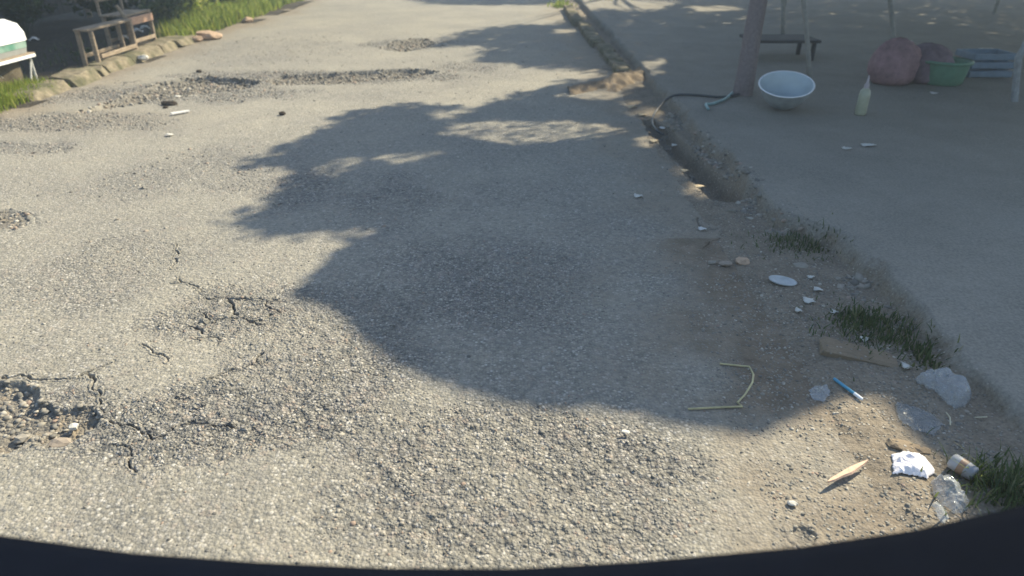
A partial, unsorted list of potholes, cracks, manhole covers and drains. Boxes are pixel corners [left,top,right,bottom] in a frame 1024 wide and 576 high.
pothole [0,207,35,232]
crack [138,243,283,382]
crack [0,360,237,475]
pothole [264,68,442,87]
pothole [73,75,264,114]
pothole [0,379,110,457]
pothole [377,38,438,53]
